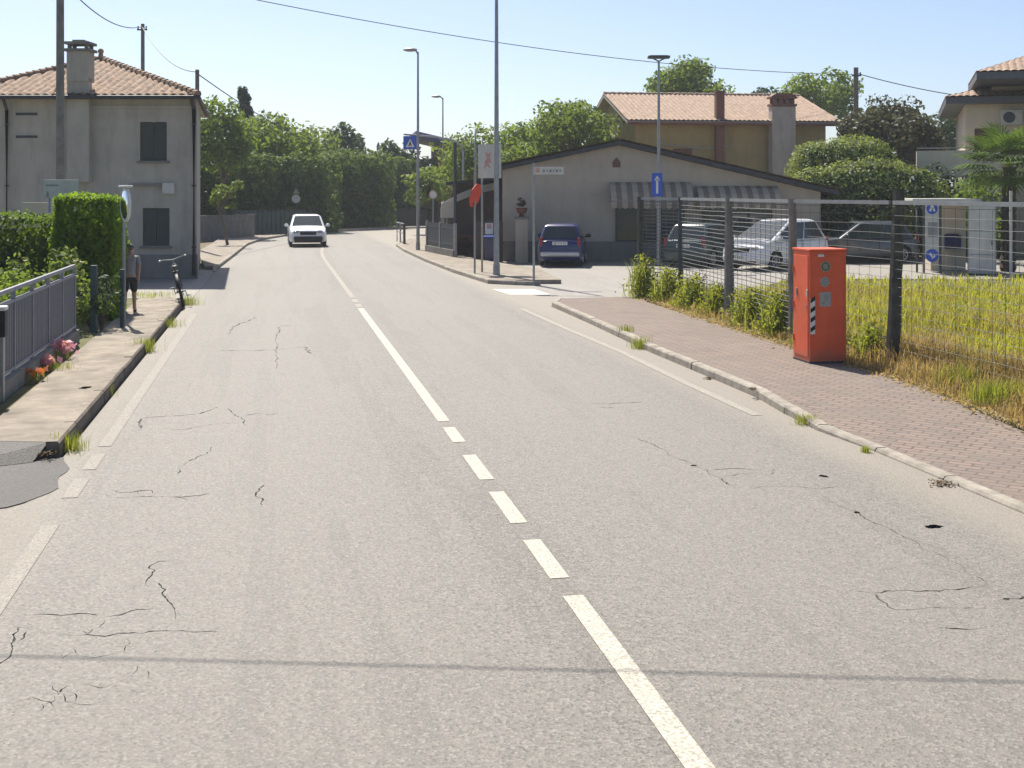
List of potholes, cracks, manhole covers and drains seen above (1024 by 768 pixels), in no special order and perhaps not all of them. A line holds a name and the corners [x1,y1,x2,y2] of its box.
crack [0,560,216,711]
crack [631,436,1024,630]
crack [106,490,210,500]
crack [138,407,279,430]
crack [224,326,311,368]
